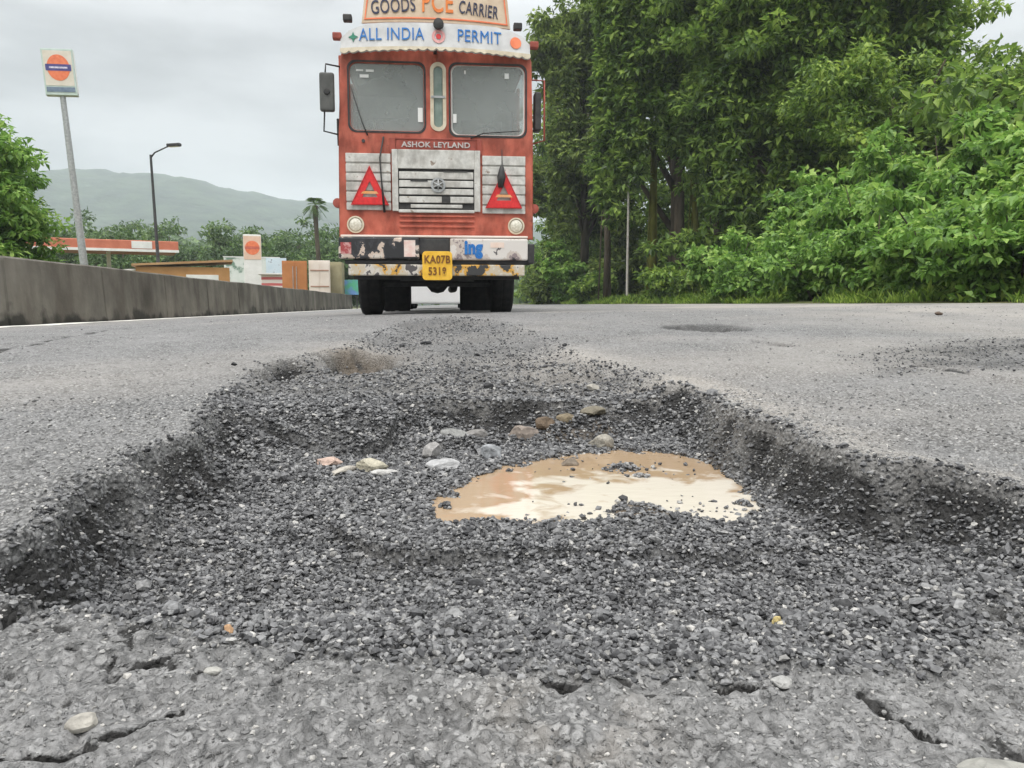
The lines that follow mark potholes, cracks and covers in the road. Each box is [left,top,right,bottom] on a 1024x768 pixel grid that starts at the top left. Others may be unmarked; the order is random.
crack [528,674,772,701]
crack [849,685,955,746]
crack [0,704,192,767]
crack [102,642,212,685]
pothole [206,317,677,414]
pothole [0,384,1024,671]
